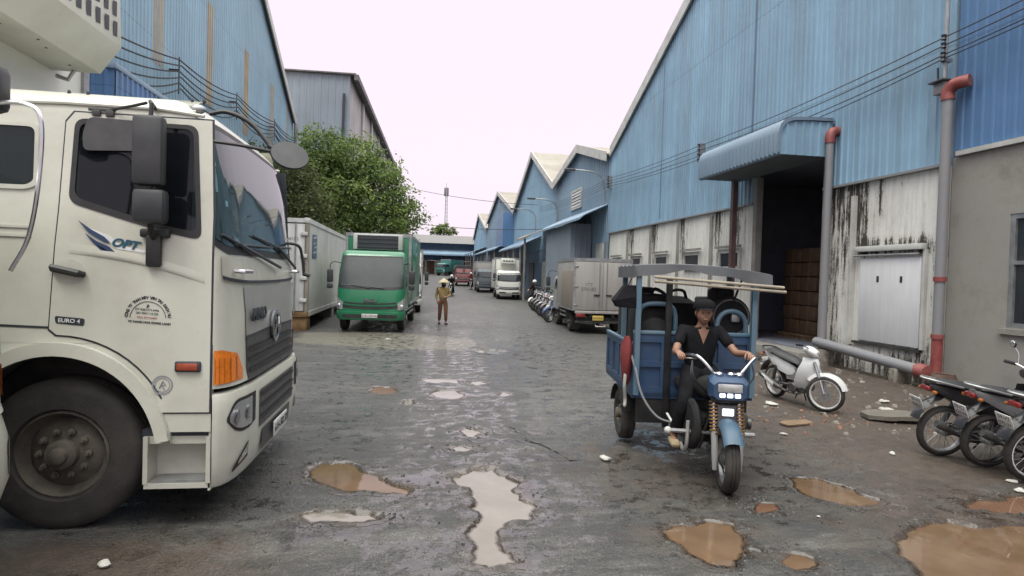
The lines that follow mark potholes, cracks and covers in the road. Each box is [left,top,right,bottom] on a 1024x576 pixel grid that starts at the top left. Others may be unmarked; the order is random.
pothole [740,497,792,518]
pothole [363,385,405,395]
pothole [764,546,836,576]
crack [502,426,579,461]
pothole [948,491,1024,518]
pothole [778,474,901,510]
pothole [285,505,394,528]
pothole [452,426,490,439]
pothole [296,458,423,498]
pothole [439,463,550,576]
pothole [441,443,480,454]
pothole [878,513,1024,576]
